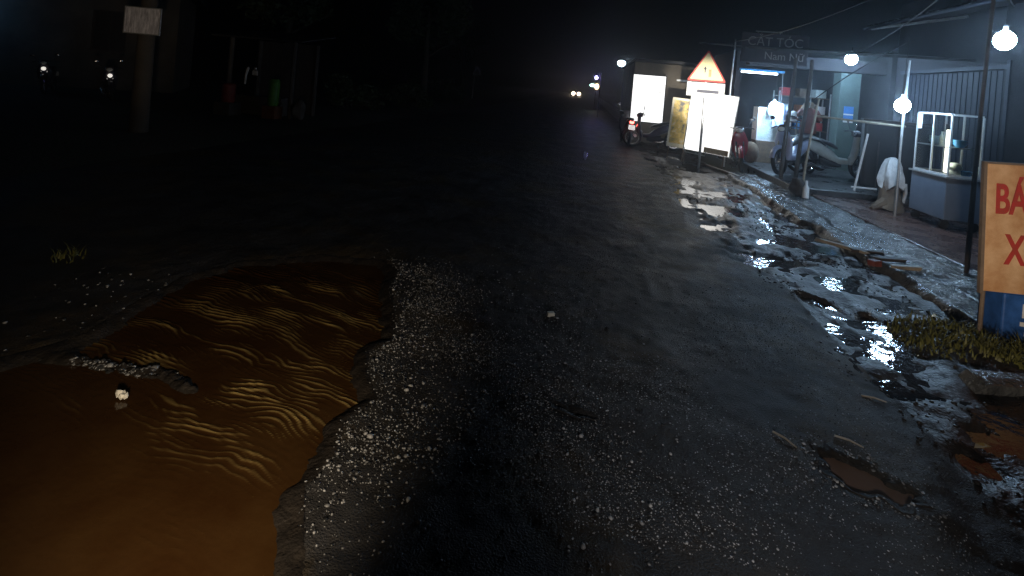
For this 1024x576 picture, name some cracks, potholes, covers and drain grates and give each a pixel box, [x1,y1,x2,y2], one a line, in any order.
pothole [0,254,399,576]
pothole [808,442,933,516]
pothole [792,290,834,310]
